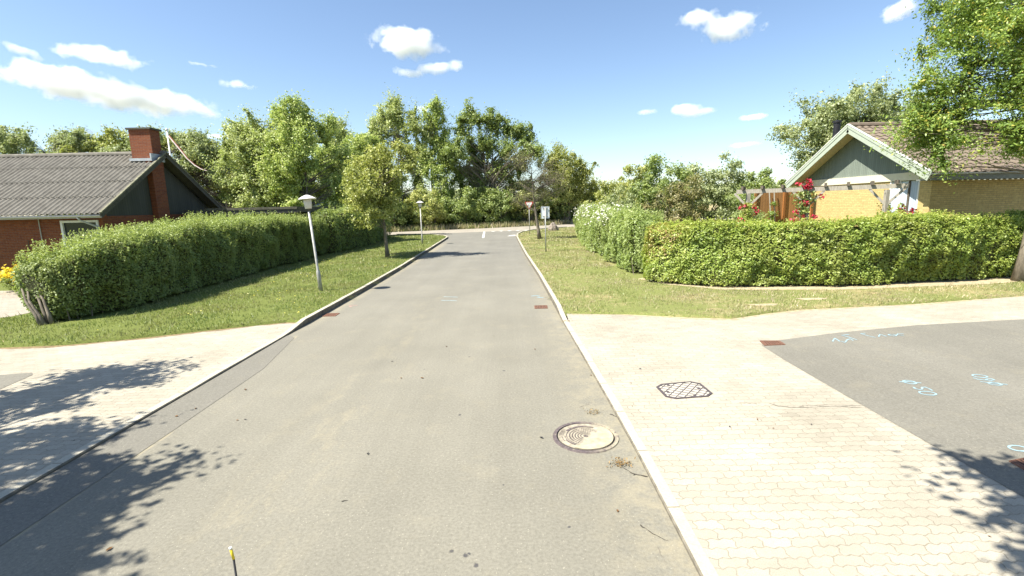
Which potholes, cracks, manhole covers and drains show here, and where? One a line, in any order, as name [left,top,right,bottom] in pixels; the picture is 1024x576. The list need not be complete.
manhole cover [553,421,619,454]
